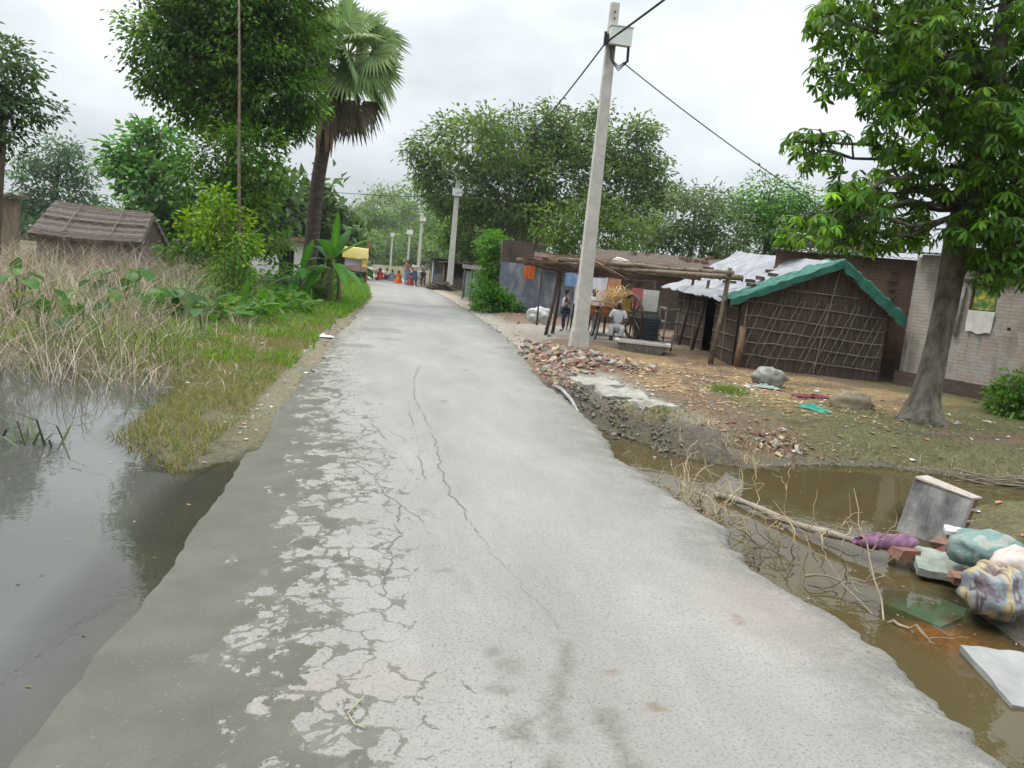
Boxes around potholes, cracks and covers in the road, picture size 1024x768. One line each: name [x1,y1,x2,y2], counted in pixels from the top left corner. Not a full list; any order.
crack [350,368,560,630]
